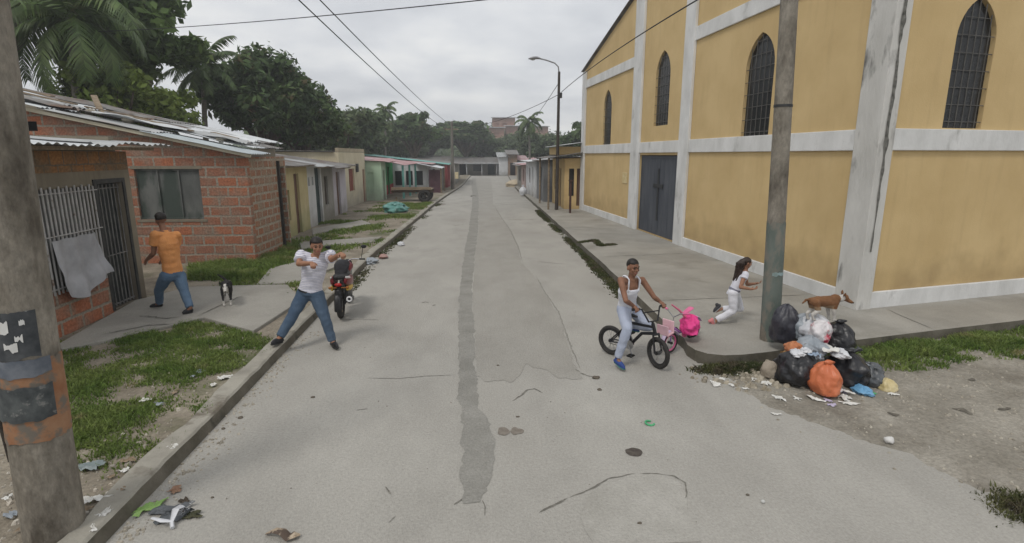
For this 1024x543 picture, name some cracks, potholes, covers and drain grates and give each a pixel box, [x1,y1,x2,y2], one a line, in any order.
crack [540,473,688,512]
pothole [625,448,643,456]
